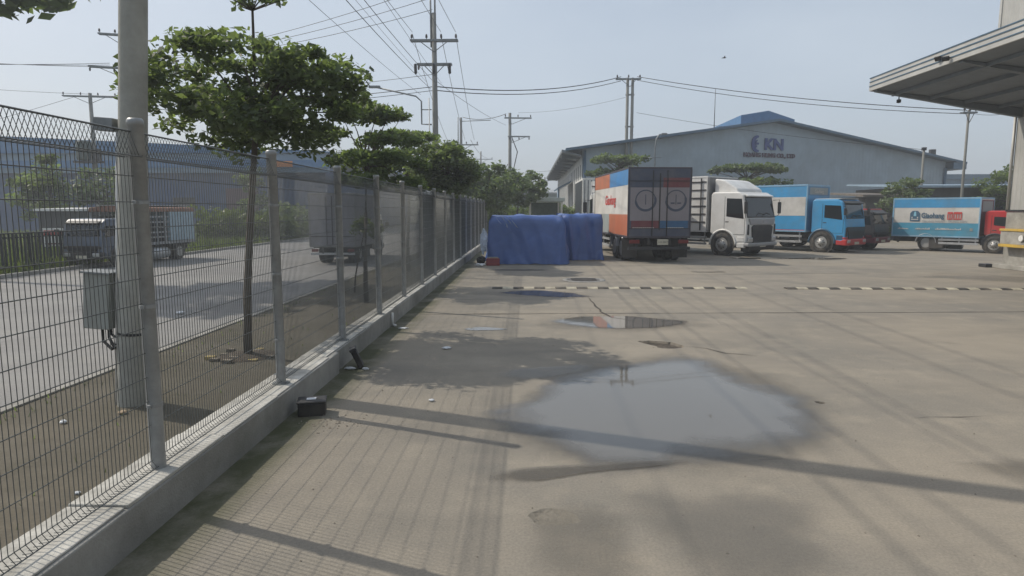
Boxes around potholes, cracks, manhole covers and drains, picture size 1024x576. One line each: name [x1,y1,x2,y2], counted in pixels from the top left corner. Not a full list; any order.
pothole [638,341,684,349]
